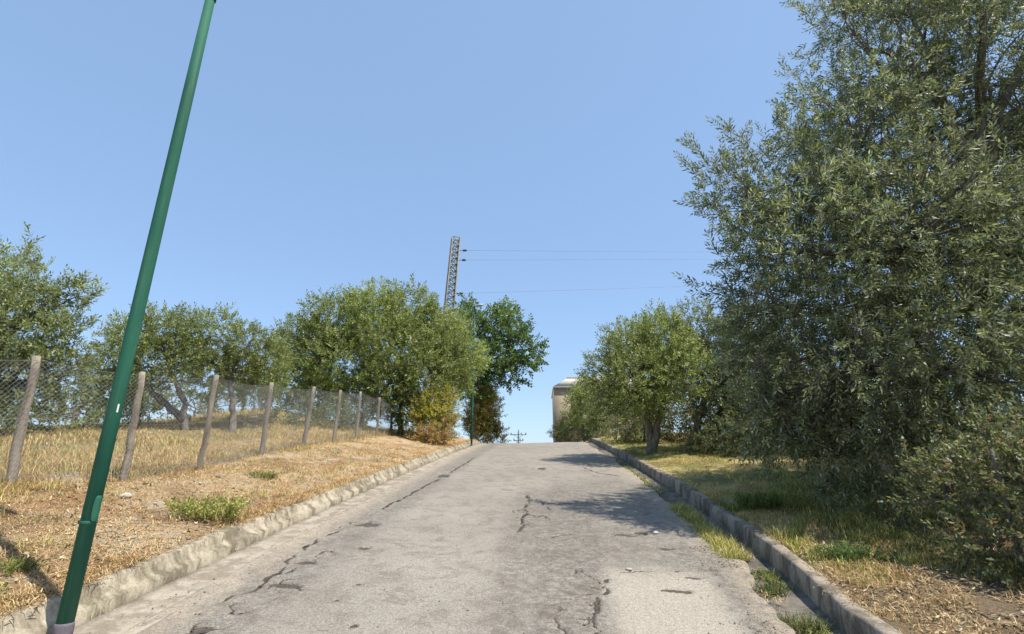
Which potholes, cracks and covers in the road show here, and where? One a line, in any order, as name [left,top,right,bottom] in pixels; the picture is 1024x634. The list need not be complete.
crack [513,494,577,538]
crack [188,458,474,634]
crack [554,570,678,634]
